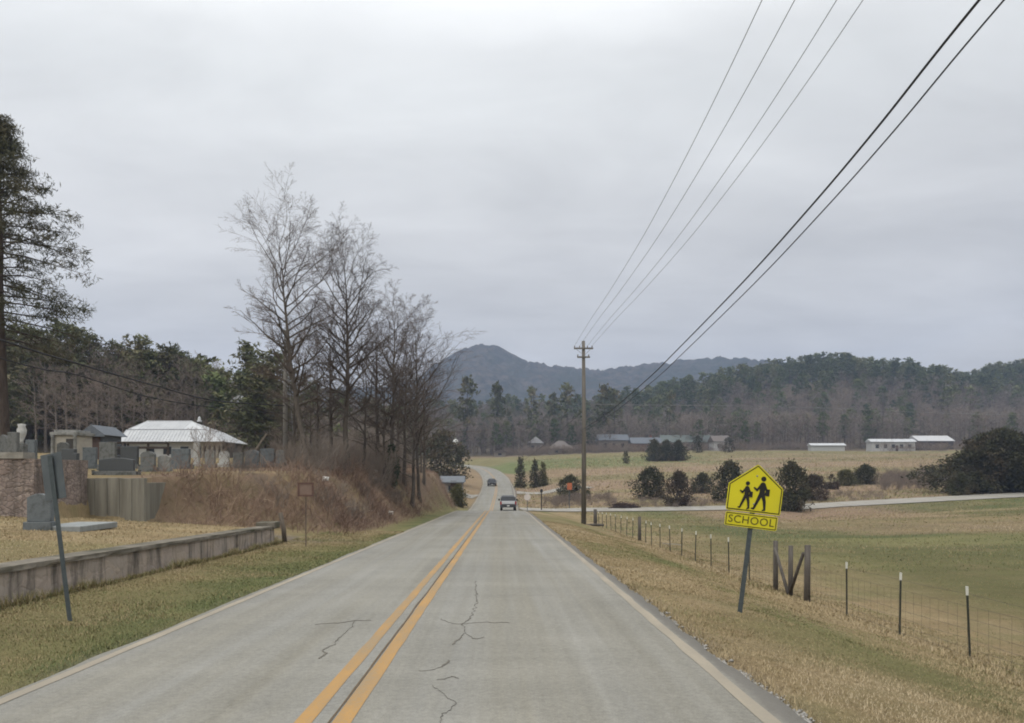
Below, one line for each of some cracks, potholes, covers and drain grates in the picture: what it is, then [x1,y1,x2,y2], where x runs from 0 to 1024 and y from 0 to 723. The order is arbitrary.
crack [315,620,365,659]
crack [425,581,509,723]
